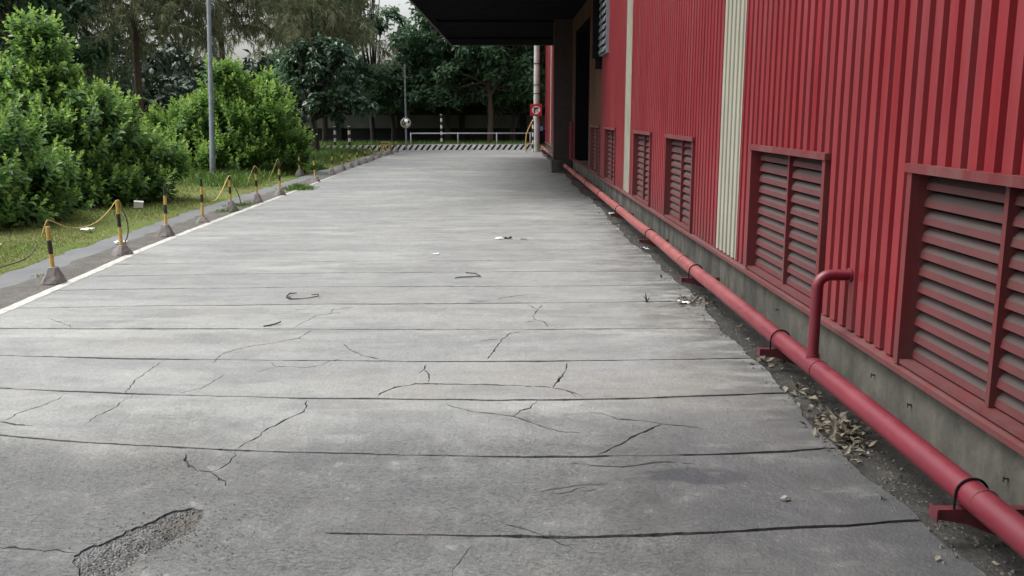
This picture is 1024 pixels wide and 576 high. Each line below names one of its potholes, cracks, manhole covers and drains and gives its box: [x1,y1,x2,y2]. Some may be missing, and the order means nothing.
crack [183,401,308,486]
crack [542,413,703,495]
crack [89,362,160,422]
crack [379,364,581,433]
crack [259,345,377,372]
crack [182,307,353,393]
pothole [73,510,202,576]
crack [3,396,62,426]
